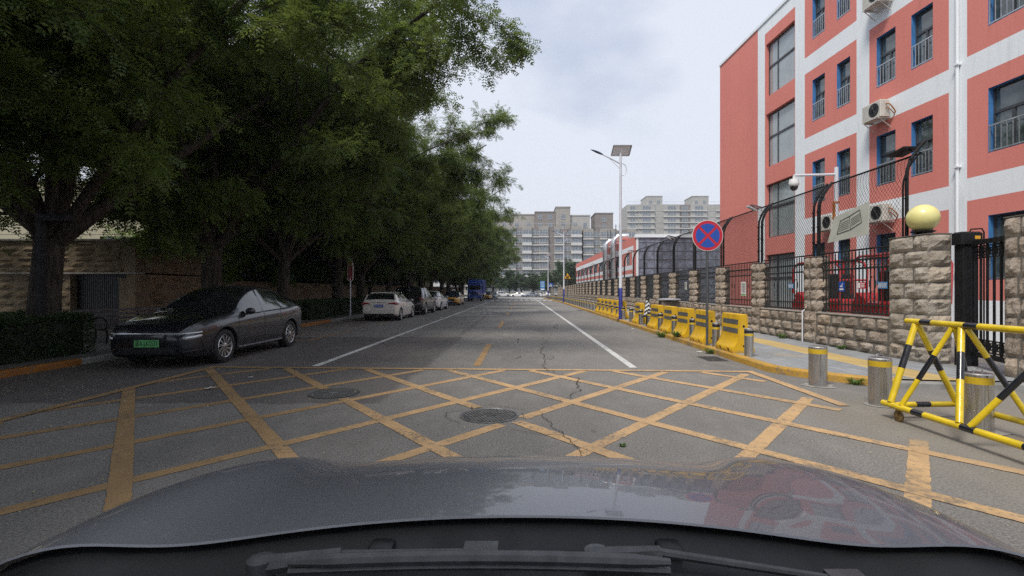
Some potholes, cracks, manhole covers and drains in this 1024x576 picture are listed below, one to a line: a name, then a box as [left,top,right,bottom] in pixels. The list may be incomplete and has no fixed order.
manhole cover [308,388,360,399]
crack [445,405,582,455]
manhole cover [460,408,518,424]
